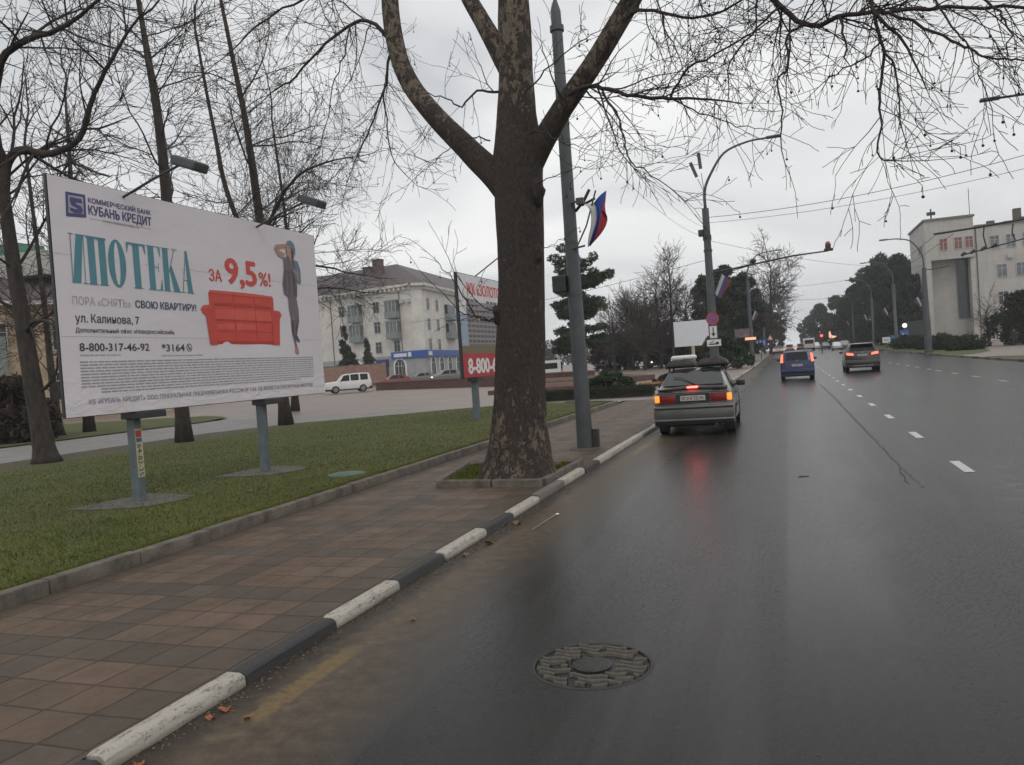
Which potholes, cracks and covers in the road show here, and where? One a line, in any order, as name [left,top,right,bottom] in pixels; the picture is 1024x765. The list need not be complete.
manhole cover [531,643,654,690]
crack [818,383,925,487]
